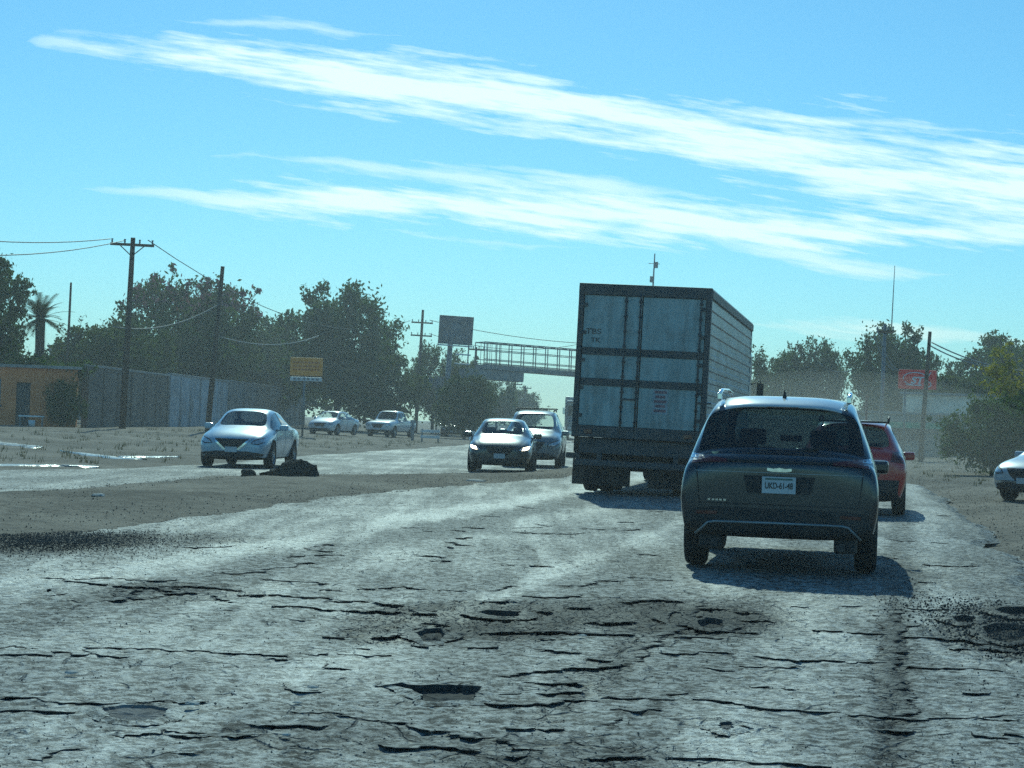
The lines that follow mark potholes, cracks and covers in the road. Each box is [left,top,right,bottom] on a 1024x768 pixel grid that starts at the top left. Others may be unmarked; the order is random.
pothole [685,616,742,632]
crack [0,696,209,713]
pothole [967,622,1024,647]
pothole [373,682,497,706]
pothole [85,703,185,726]
crack [27,747,86,768]
pothole [400,627,465,645]
crack [42,543,1024,744]
crack [108,710,564,758]
